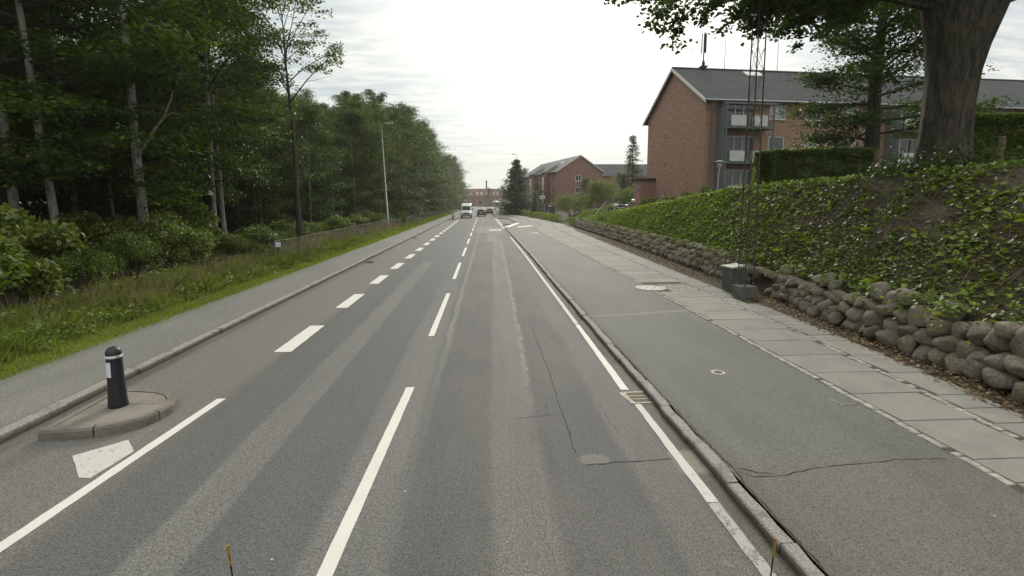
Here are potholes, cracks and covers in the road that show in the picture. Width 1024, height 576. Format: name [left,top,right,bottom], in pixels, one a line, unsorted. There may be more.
crack [517,331,672,465]
drain grate [621,391,653,404]
crack [544,267,943,576]
